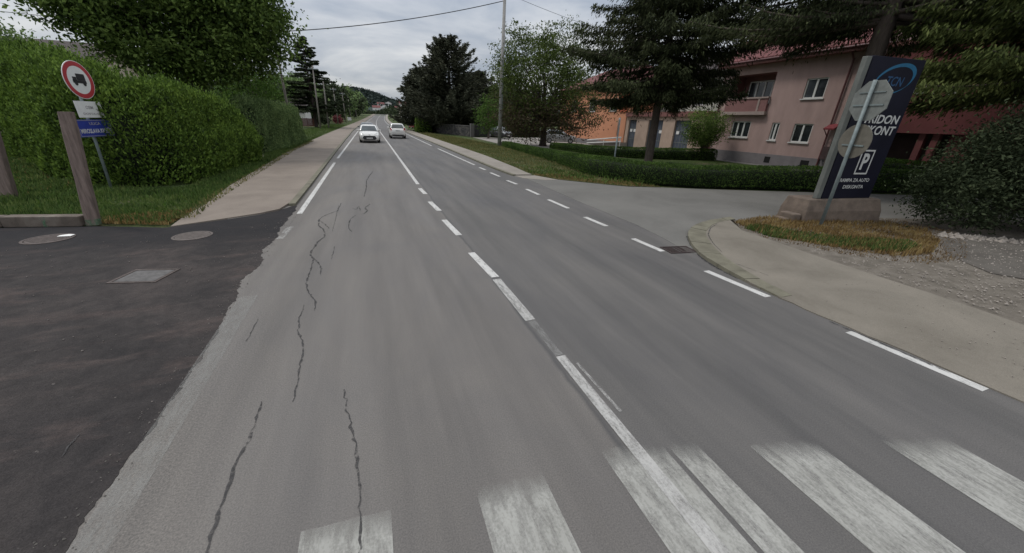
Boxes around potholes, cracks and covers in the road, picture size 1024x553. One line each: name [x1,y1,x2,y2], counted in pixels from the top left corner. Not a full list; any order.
crack [205,401,262,553]
crack [292,173,372,402]
manhole cover [171,231,213,241]
drain grate [660,246,696,254]
manhole cover [19,233,76,245]
manhole cover [106,268,181,284]
crack [343,389,362,553]
